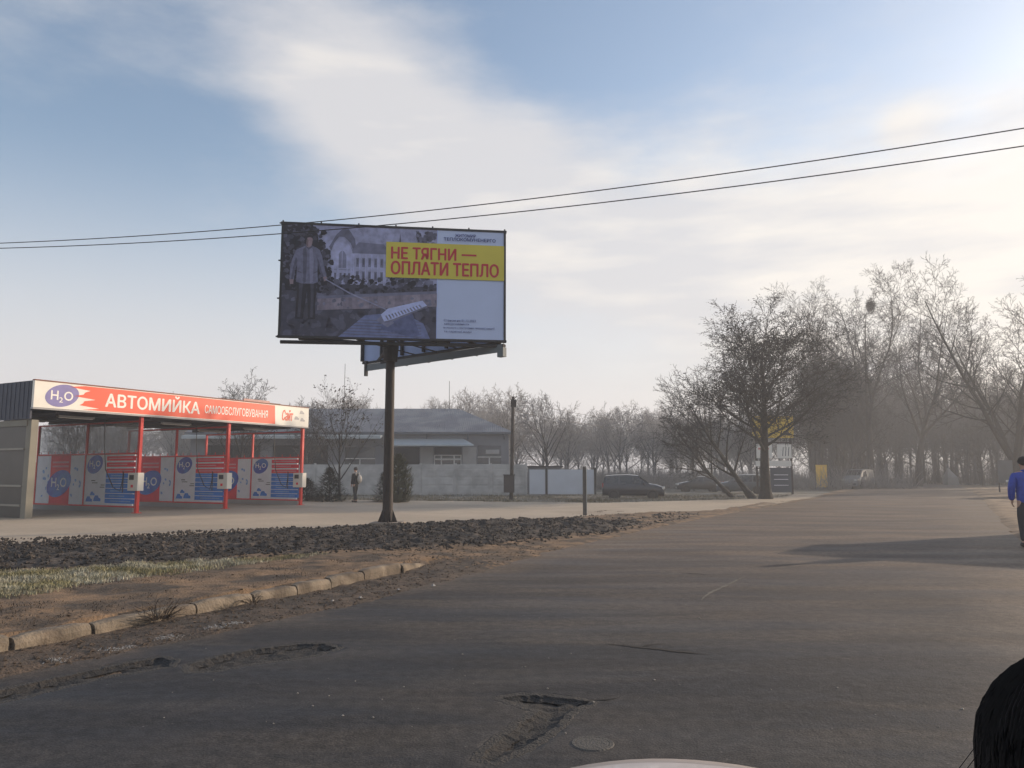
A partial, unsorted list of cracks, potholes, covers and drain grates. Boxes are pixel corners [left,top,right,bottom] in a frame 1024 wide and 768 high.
pothole [469,692,599,766]
crack [605,643,708,655]
manhole cover [571,736,614,752]
pothole [180,642,344,674]
crack [690,573,745,600]
